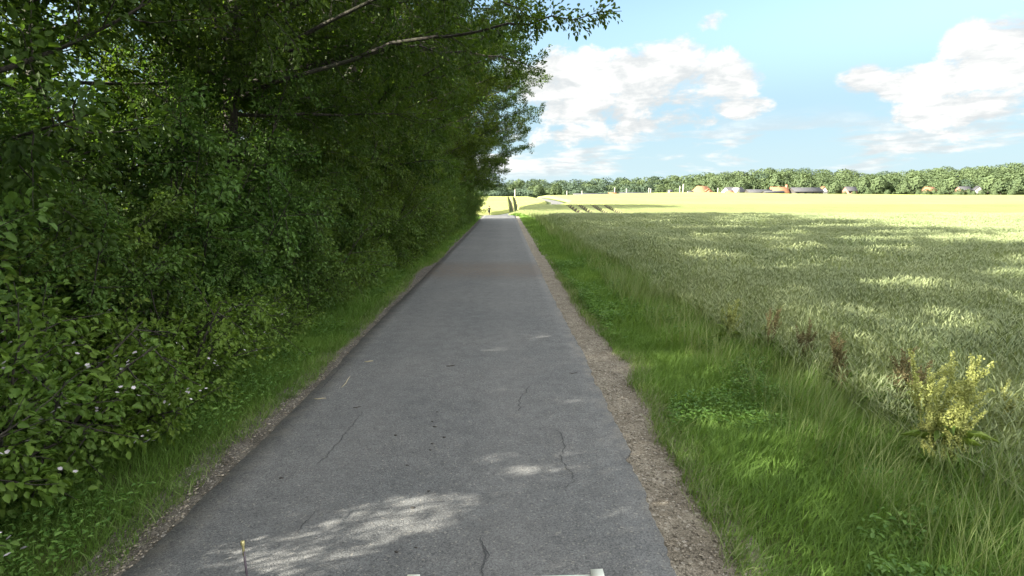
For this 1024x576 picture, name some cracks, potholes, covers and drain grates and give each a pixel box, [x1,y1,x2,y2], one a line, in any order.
crack [557,430,575,487]
crack [480,537,490,576]
